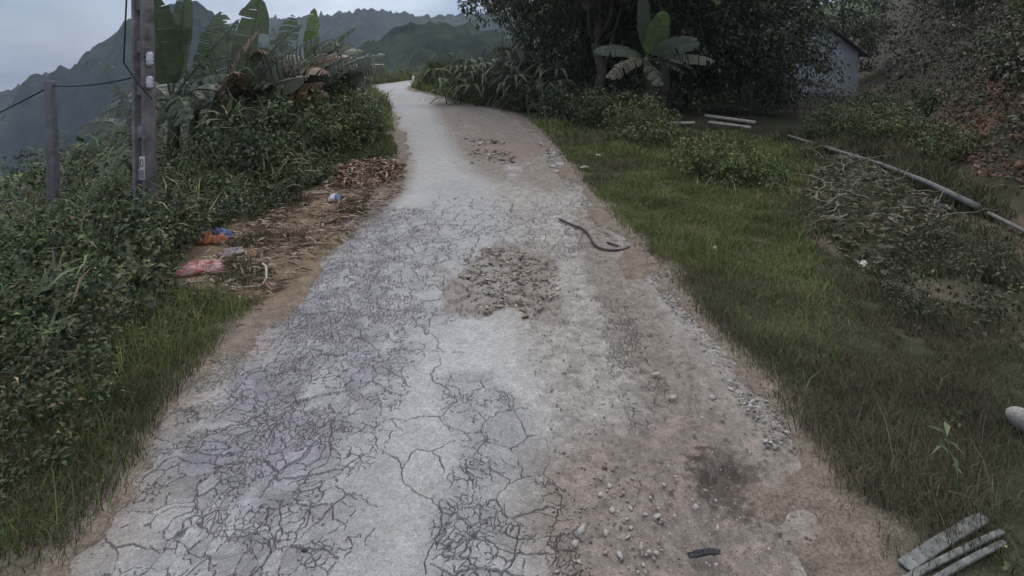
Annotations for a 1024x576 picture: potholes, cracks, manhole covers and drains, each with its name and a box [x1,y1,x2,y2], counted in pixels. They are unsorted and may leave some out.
crack [88,192,618,576]
pothole [428,238,575,328]
pothole [452,134,547,168]
